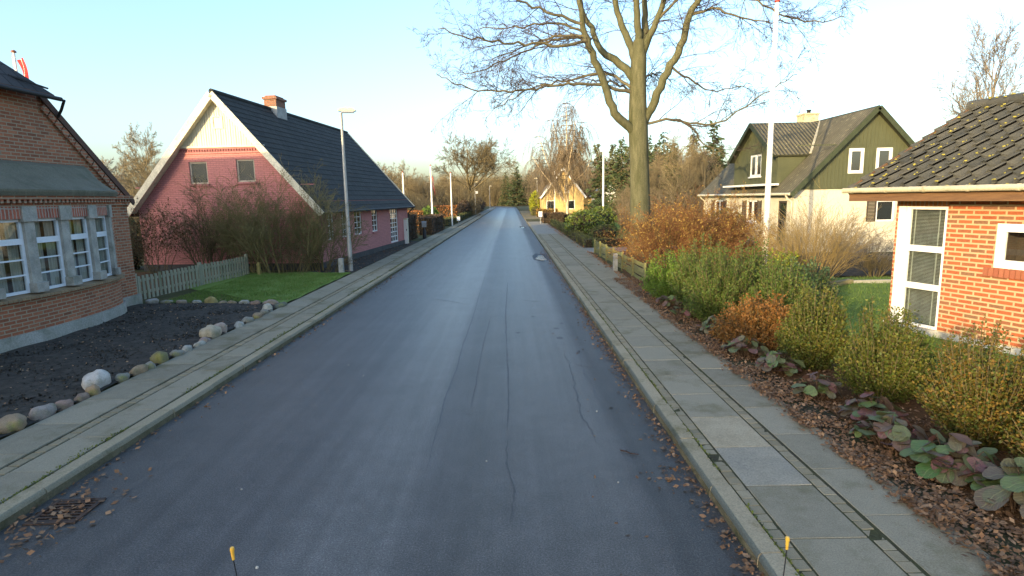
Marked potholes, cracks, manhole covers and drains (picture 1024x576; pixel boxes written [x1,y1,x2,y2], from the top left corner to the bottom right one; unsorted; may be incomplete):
crack [469,283,540,522]
drain grate [22,497,107,526]
crack [564,353,600,445]
